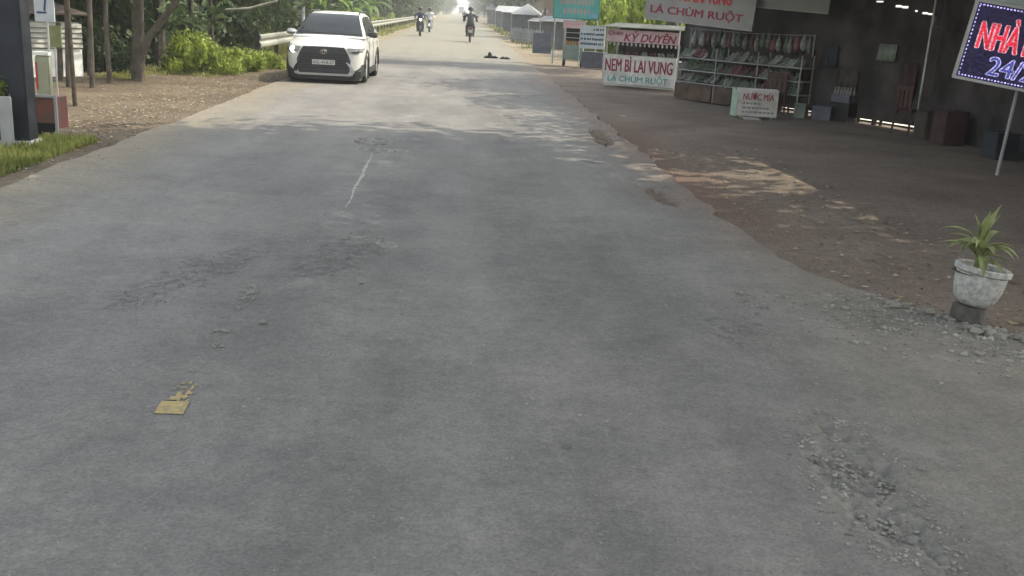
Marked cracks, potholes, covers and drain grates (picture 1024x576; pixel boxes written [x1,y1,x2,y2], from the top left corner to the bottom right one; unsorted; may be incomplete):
pothole [799,417,952,576]
crack [345,154,372,207]
pothole [643,188,680,207]
pothole [587,129,615,148]
